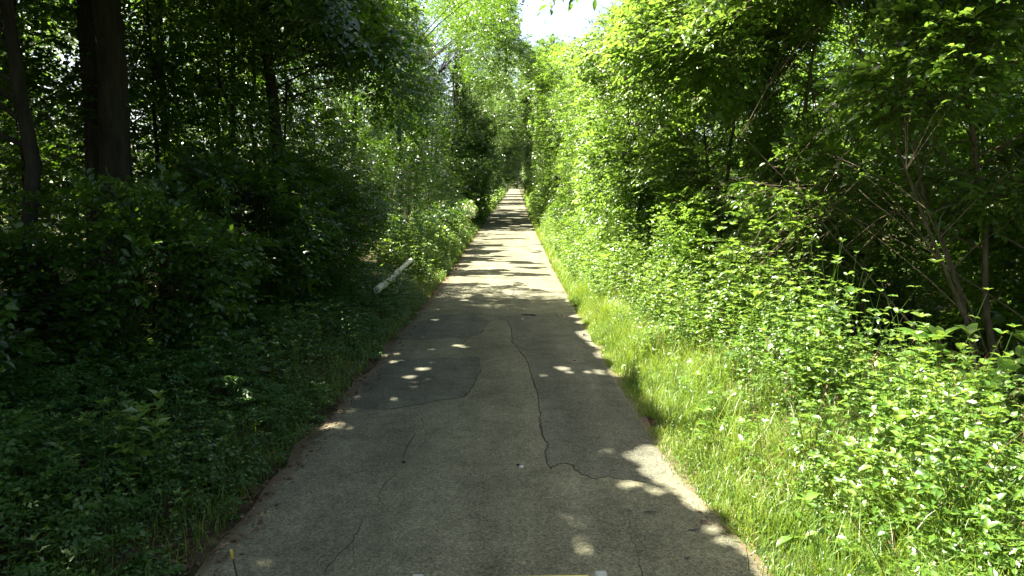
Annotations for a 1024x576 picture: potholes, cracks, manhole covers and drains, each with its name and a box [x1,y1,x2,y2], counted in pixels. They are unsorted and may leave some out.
crack [403,298,652,482]
crack [317,475,395,576]
crack [593,500,671,576]
